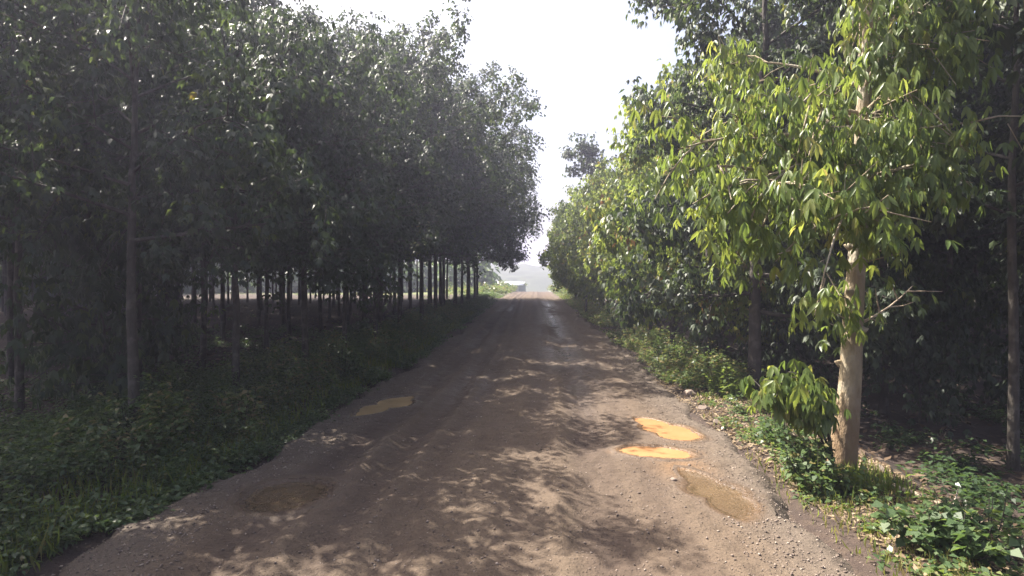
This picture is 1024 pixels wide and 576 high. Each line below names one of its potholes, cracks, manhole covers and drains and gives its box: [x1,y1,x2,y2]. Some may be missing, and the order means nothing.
pothole [609,443,704,462]
pothole [629,416,709,443]
pothole [349,395,421,418]
pothole [225,474,344,520]
pothole [670,464,776,527]
